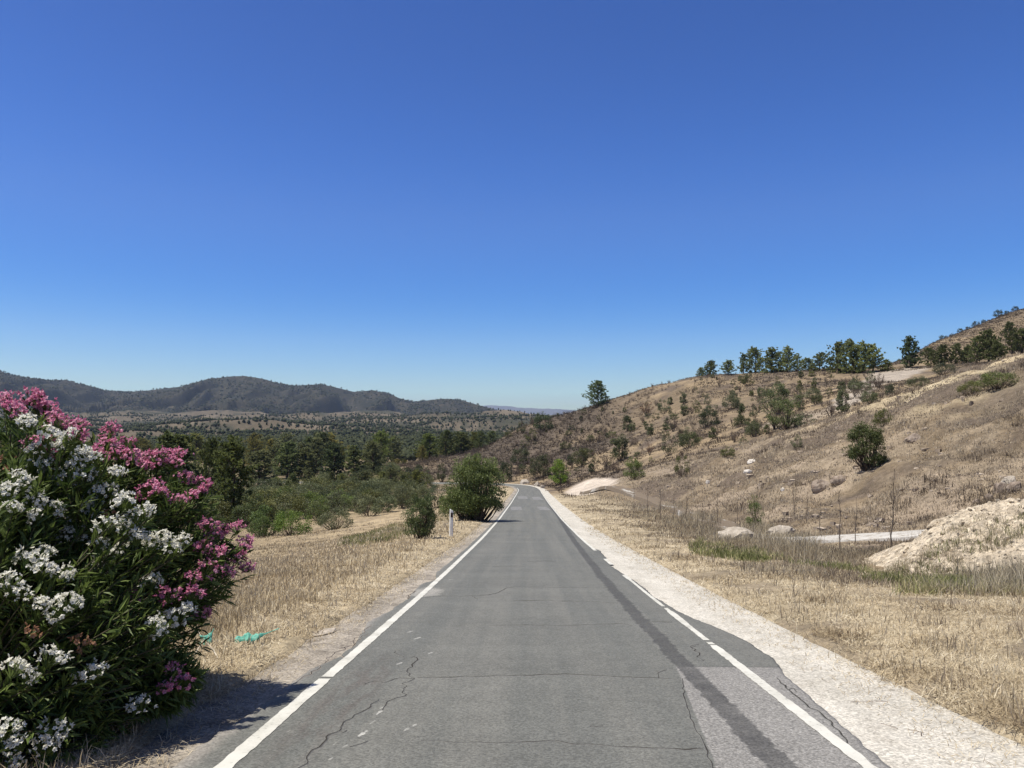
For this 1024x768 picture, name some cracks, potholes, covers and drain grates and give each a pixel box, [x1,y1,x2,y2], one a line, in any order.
crack [407,587,610,603]
crack [776,677,887,744]
crack [298,651,669,768]
